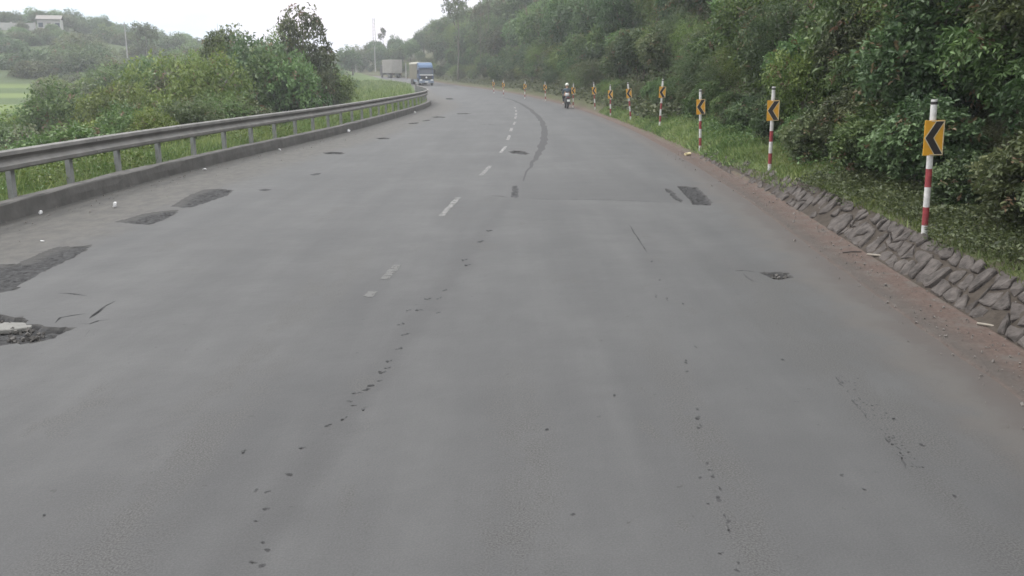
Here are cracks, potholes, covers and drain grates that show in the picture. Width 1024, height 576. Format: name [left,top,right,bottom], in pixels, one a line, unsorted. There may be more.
pothole [760,272,794,280]
crack [55,293,115,336]
crack [629,225,741,573]
crack [835,374,925,468]
pothole [0,314,76,346]
